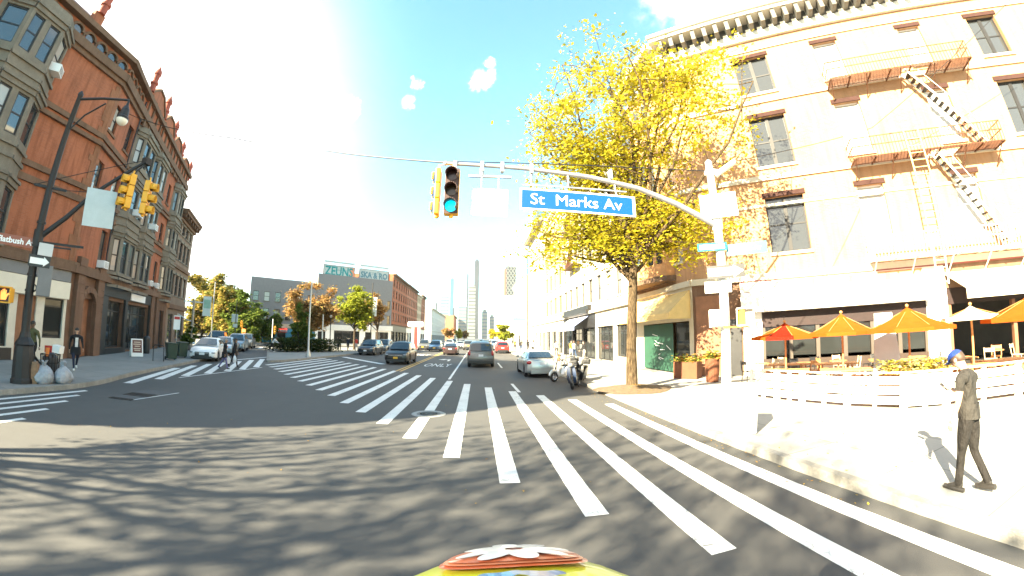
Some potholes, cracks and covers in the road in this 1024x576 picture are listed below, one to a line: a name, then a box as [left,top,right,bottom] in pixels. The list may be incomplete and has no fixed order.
manhole cover [412,410,446,418]
